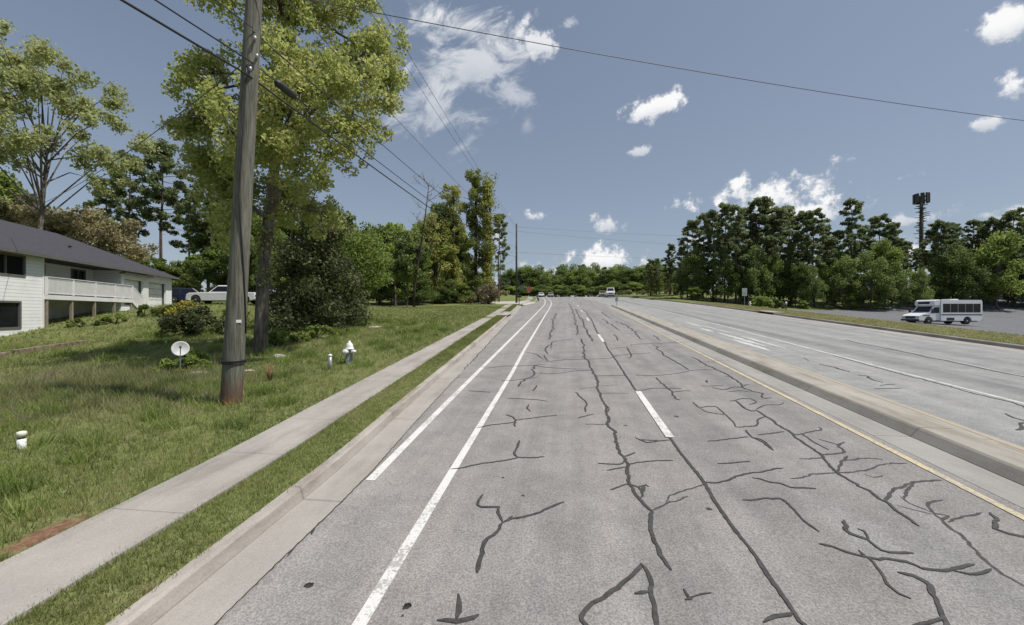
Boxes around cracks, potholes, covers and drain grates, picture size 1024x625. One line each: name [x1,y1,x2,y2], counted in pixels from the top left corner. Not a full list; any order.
crack [437,593,479,624]
crack [452,304,1024,625]
